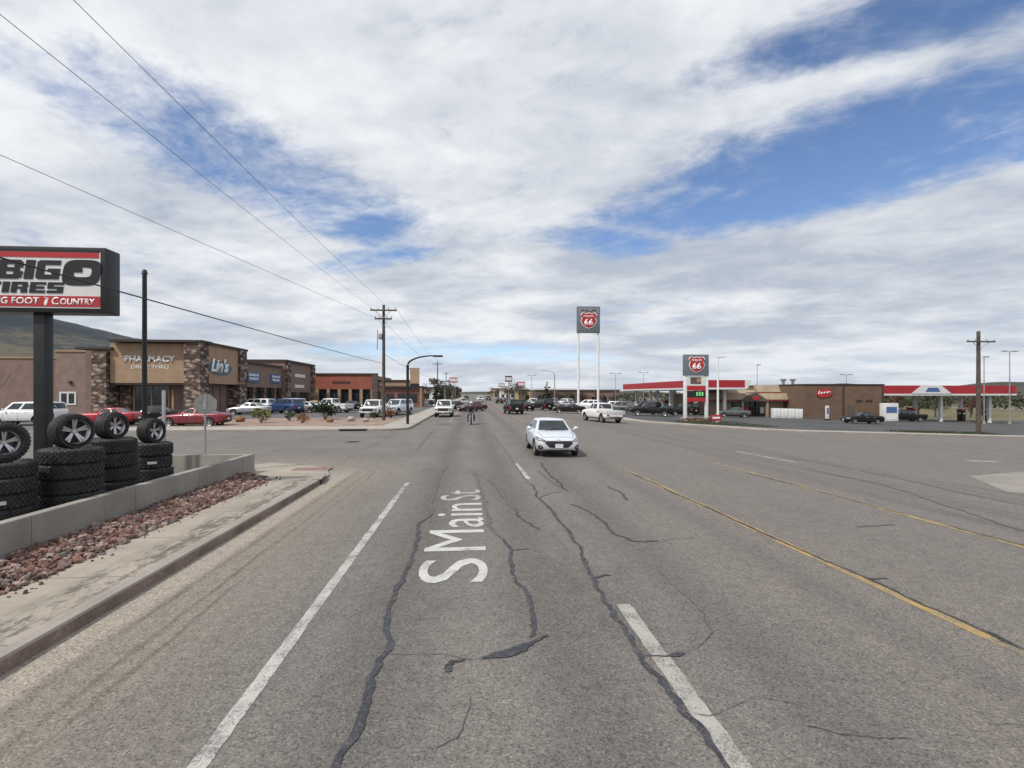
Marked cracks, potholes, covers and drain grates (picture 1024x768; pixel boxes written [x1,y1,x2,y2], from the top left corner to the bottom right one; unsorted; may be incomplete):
crack [806,725,912,739]
crack [435,696,506,749]
crack [488,479,539,529]
